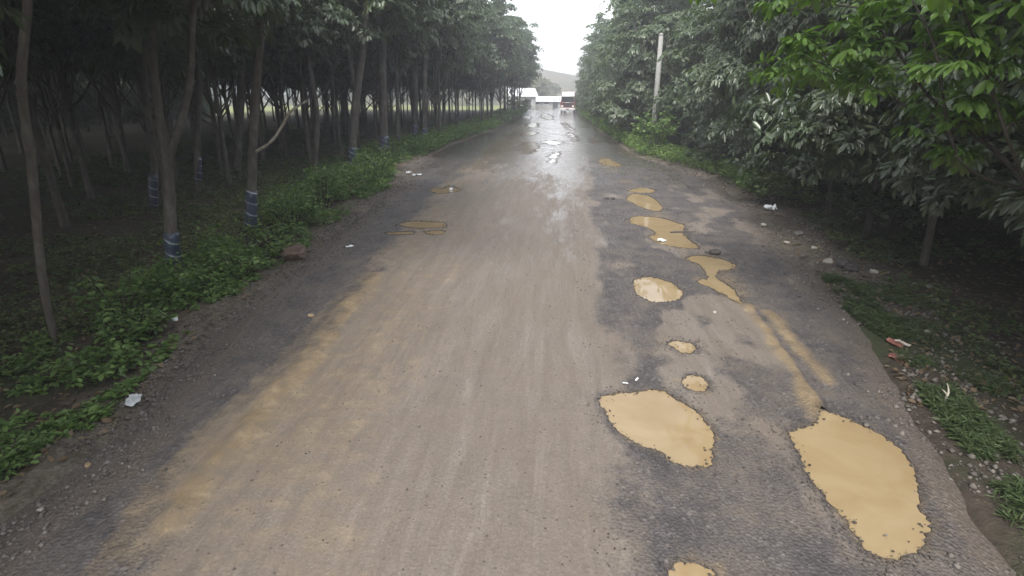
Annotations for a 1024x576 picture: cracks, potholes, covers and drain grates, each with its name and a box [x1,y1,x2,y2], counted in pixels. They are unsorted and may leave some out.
pothole [668,339,698,354]
pothole [633,276,684,303]
pothole [685,255,742,304]
pothole [626,194,663,211]
pothole [629,216,700,249]
pothole [598,388,716,468]
pothole [788,409,935,561]
pothole [682,374,708,392]
pothole [668,558,719,576]
pothole [597,158,622,167]
